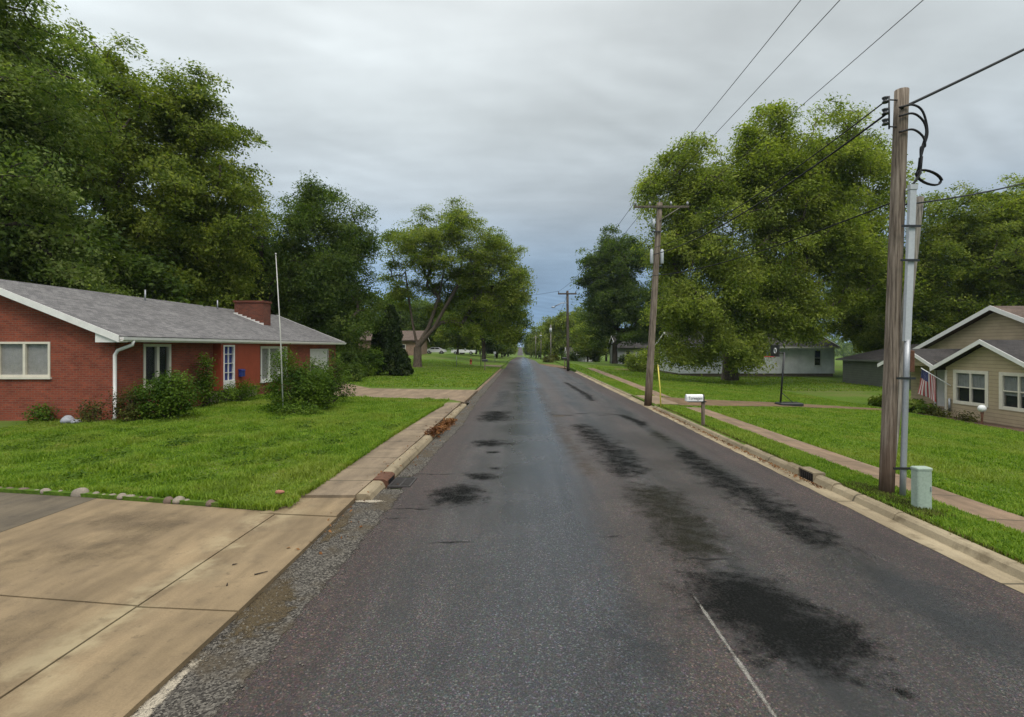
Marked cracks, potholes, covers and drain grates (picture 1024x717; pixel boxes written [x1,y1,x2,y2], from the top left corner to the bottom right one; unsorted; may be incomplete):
drain grate [798,467,826,482]
drain grate [373,471,417,489]
